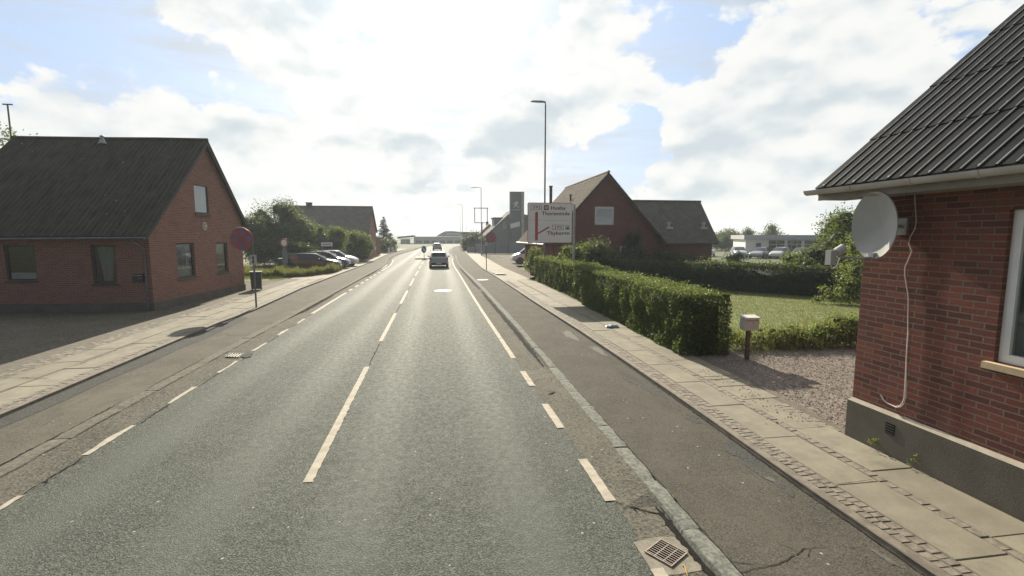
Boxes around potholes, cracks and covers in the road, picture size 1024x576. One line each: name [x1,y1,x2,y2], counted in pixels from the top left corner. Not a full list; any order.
crack [616,501,814,576]
drain grate [644,539,688,567]
